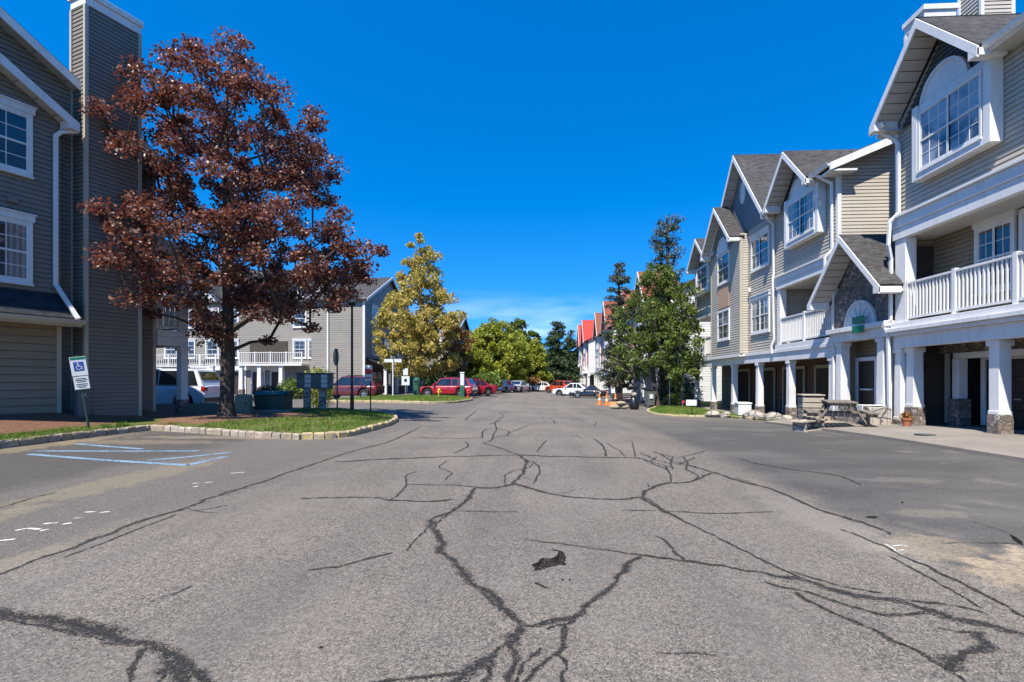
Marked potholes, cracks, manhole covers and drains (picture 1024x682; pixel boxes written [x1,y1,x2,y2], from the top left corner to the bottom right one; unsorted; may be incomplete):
pothole [532,549,567,571]
crack [301,412,1024,682]
crack [0,585,234,682]
